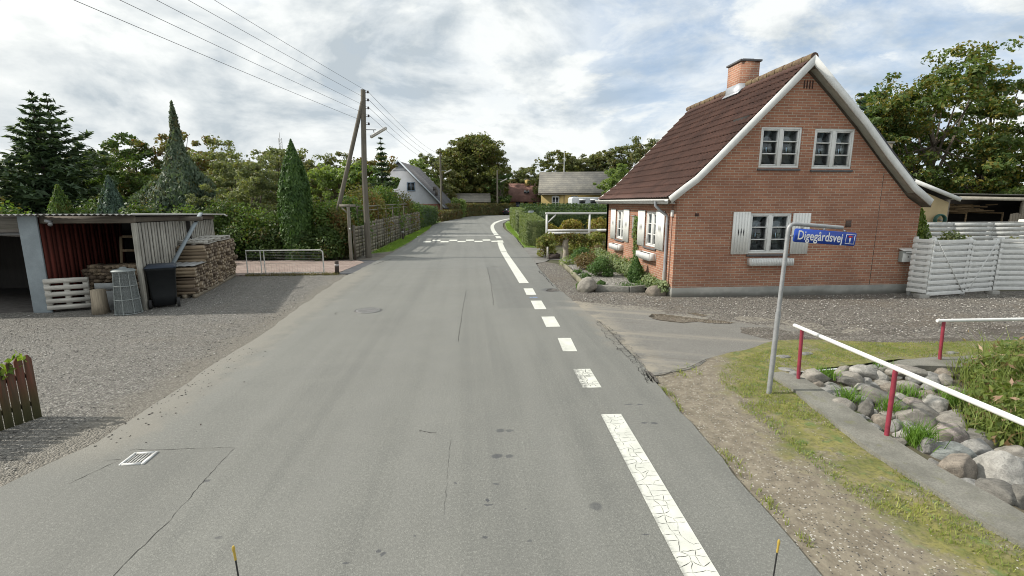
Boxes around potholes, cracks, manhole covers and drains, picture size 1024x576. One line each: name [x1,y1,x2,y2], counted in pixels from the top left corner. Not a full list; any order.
crack [597,321,709,383]
drain grate [119,451,158,466]
